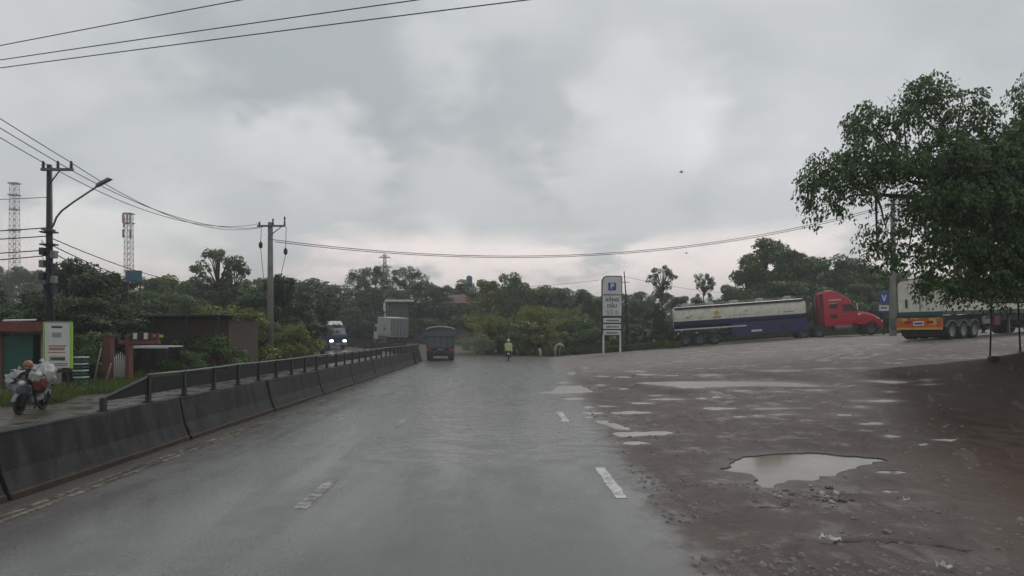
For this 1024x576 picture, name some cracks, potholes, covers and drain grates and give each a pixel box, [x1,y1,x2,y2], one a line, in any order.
crack [834,538,972,552]
pothole [720,452,887,488]
